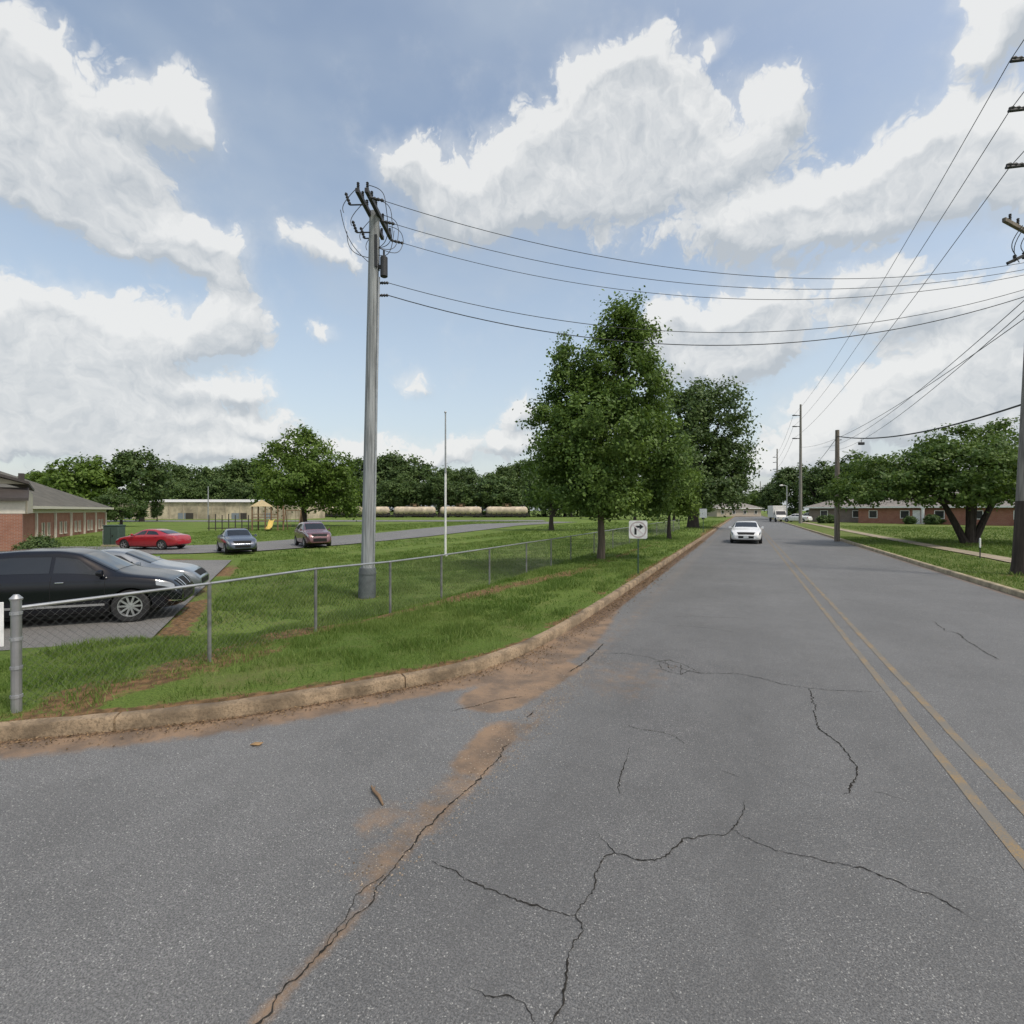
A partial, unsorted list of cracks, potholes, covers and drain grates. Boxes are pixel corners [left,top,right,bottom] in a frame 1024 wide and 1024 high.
crack [433,799,965,1024]
crack [624,653,908,802]
